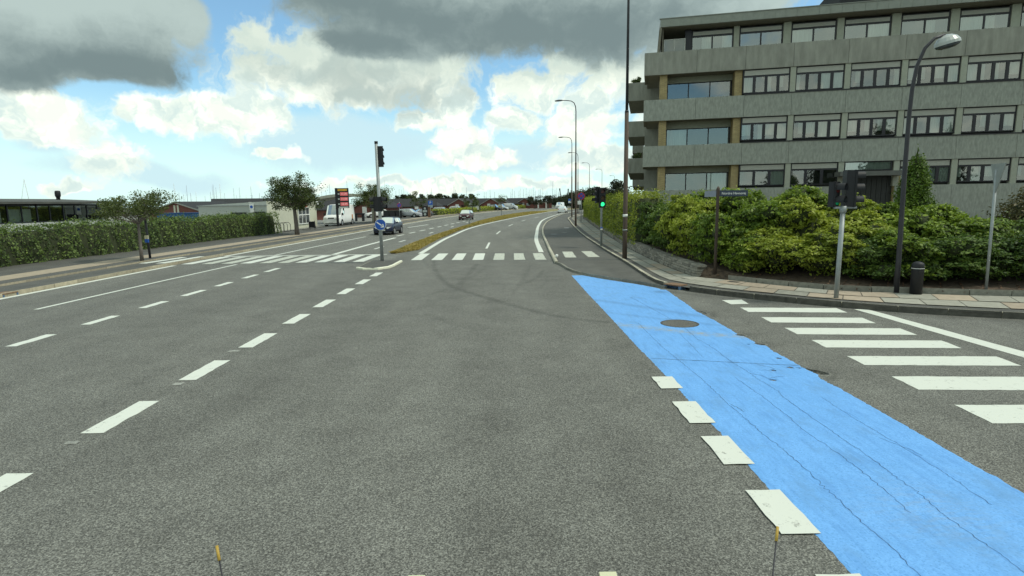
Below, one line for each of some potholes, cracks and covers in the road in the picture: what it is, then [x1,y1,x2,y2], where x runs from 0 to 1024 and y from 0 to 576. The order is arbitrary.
manhole cover [660,320,699,328]
drain grate [664,282,687,290]
